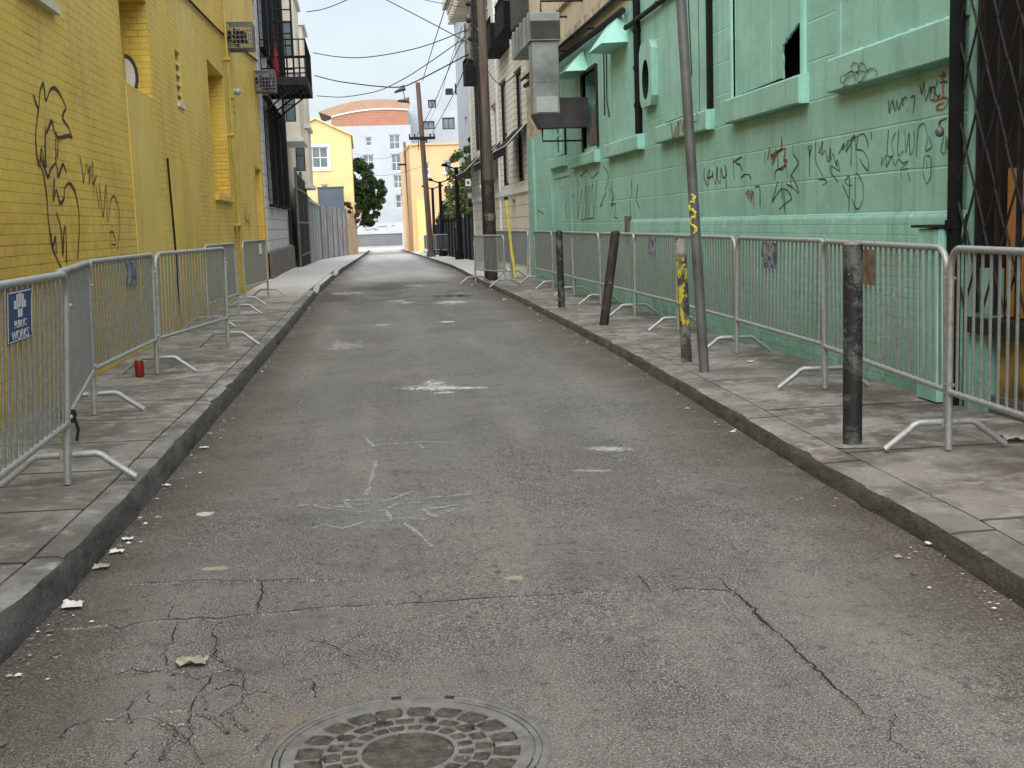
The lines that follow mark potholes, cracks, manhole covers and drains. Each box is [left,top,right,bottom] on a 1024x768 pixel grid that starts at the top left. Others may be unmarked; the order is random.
crack [50,575,650,765]
crack [668,578,920,759]
manhole cover [262,695,552,768]
